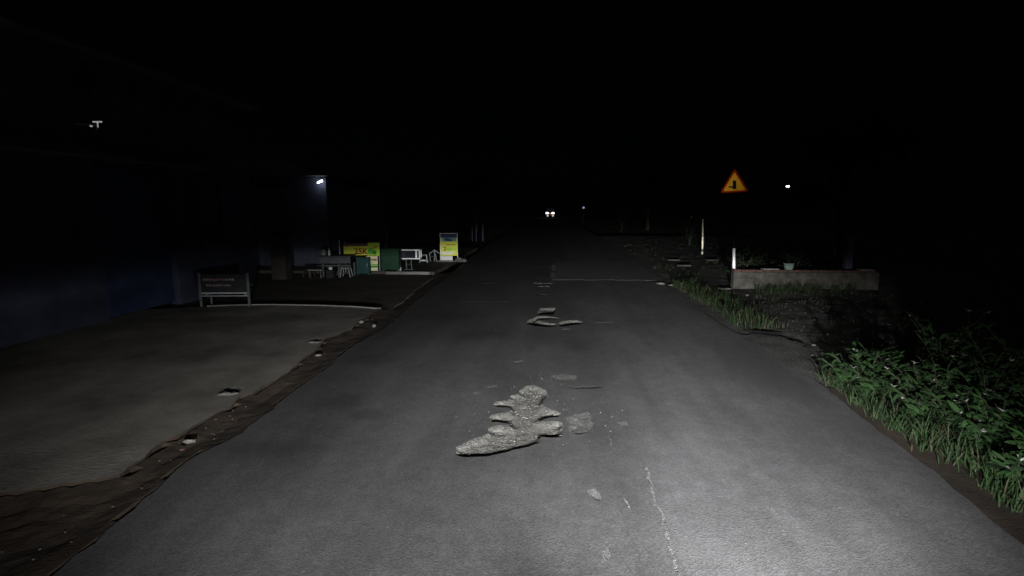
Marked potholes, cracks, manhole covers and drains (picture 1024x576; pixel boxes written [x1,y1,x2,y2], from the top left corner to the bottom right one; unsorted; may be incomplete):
pothole [454,385,564,457]
pothole [551,374,577,382]
pothole [217,387,242,396]
pothole [526,316,560,327]
crack [624,463,681,576]
pothole [565,412,593,434]
